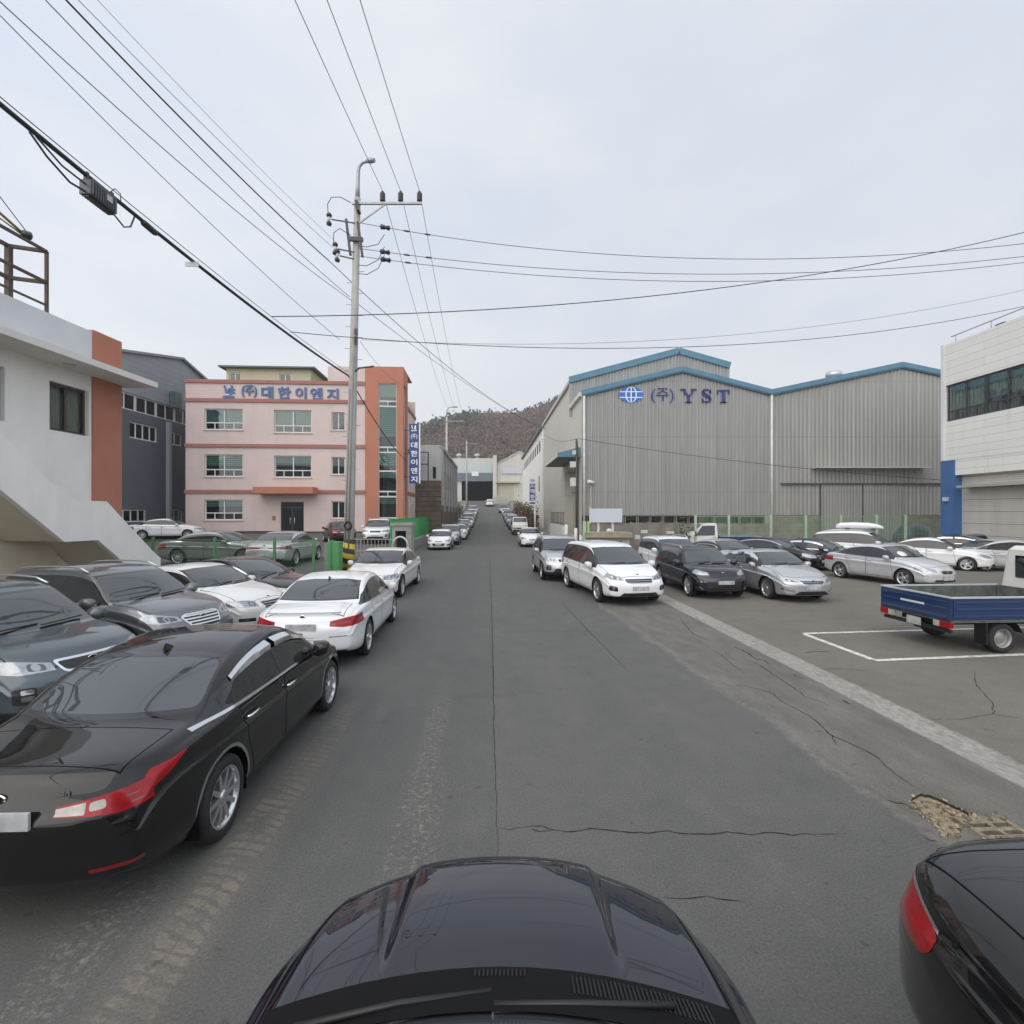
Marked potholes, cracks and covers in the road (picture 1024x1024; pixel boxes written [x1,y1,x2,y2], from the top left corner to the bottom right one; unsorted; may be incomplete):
crack [498,825,846,836]
pothole [908,793,1024,839]
drain grate [953,815,1024,839]
crack [680,618,912,785]
